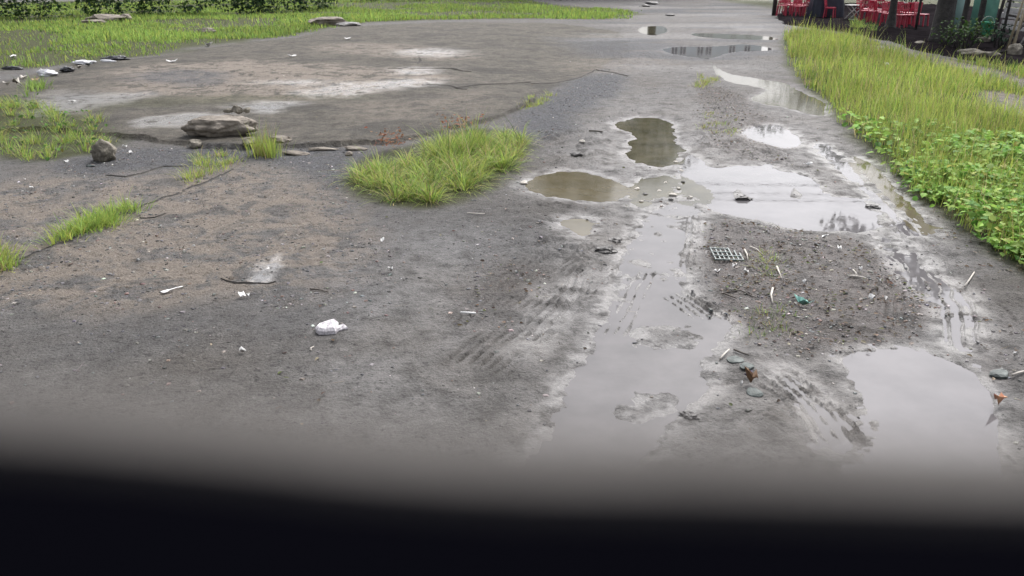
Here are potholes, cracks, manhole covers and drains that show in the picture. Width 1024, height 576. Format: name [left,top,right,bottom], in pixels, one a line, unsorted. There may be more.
drain grate [709,247,744,261]
pothole [608,116,691,170]
crack [106,166,176,177]
crack [388,57,627,90]
pothole [519,168,640,203]
pothole [555,215,601,239]
